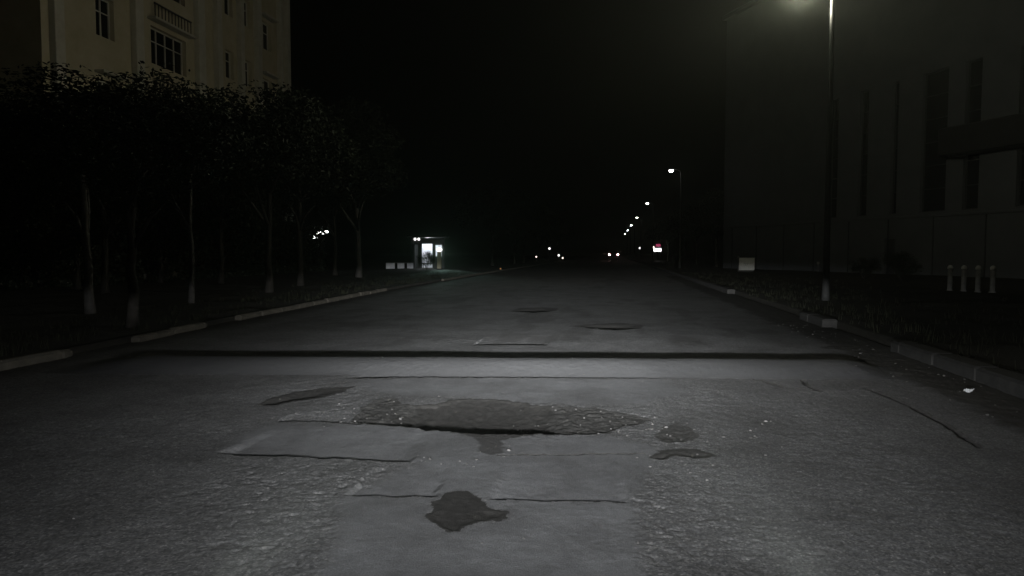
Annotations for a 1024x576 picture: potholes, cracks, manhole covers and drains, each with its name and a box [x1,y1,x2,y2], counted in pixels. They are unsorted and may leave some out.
crack [861,387,983,448]
crack [752,379,824,392]
pothole [424,491,510,532]
pothole [349,397,652,435]
pothole [649,448,717,460]
pothole [257,386,356,406]
pothole [654,424,700,443]
